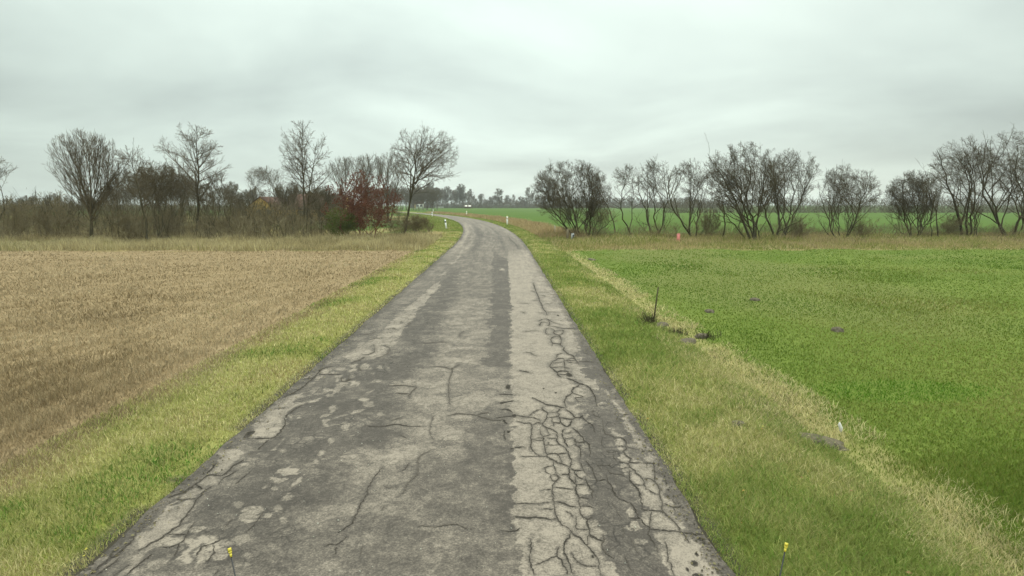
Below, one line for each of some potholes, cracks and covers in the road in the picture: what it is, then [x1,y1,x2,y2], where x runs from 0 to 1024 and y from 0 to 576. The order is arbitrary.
crack [324,291,700,574]
crack [92,322,411,575]
